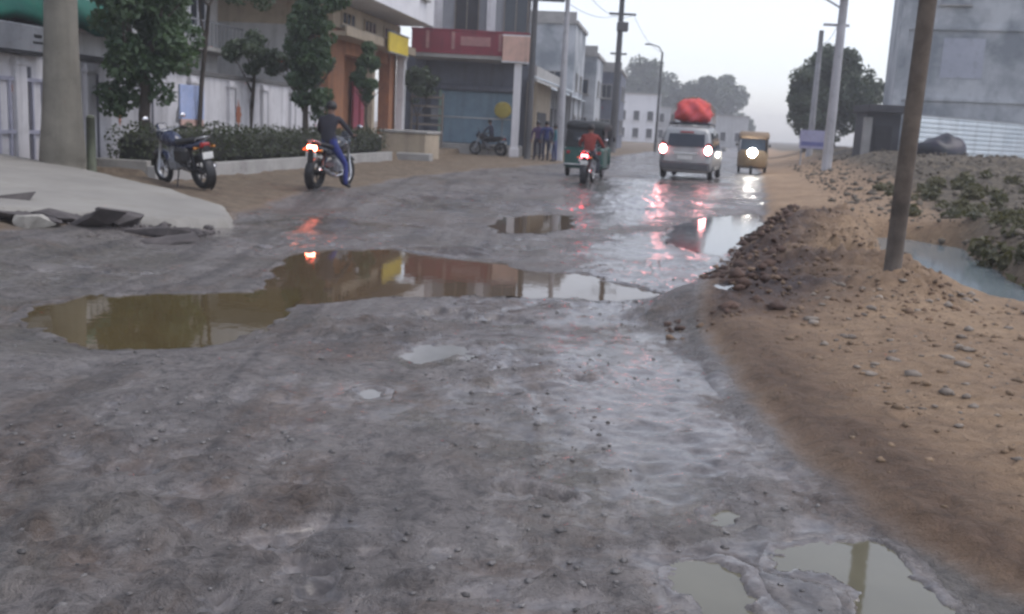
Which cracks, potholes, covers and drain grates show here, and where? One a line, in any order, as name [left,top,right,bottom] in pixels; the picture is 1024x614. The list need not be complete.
pothole [7,288,304,351]
pothole [662,213,764,257]
pothole [256,247,665,308]
pothole [384,338,490,370]
pothole [347,384,395,401]
pothole [487,214,578,234]
